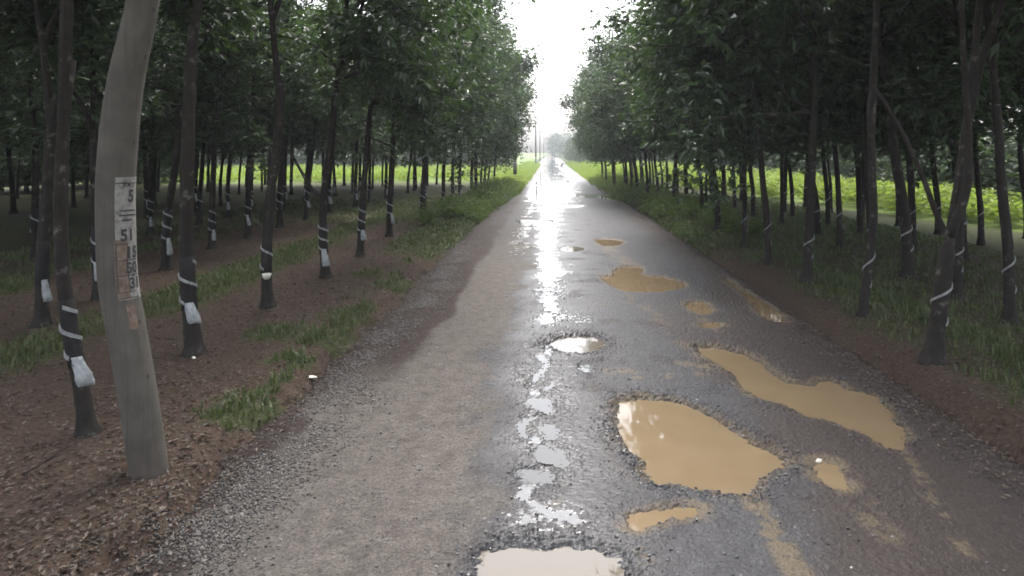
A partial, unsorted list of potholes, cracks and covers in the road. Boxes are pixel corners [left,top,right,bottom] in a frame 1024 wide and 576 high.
pothole [605,494,720,540]
pothole [593,388,801,508]
pothole [677,298,722,316]
pothole [587,237,632,247]
pothole [679,339,930,457]
pothole [554,245,592,253]
pothole [793,451,871,498]
pothole [593,263,693,294]
pothole [688,319,733,330]
pothole [534,329,621,356]
pothole [716,274,799,325]
pothole [441,524,669,576]
